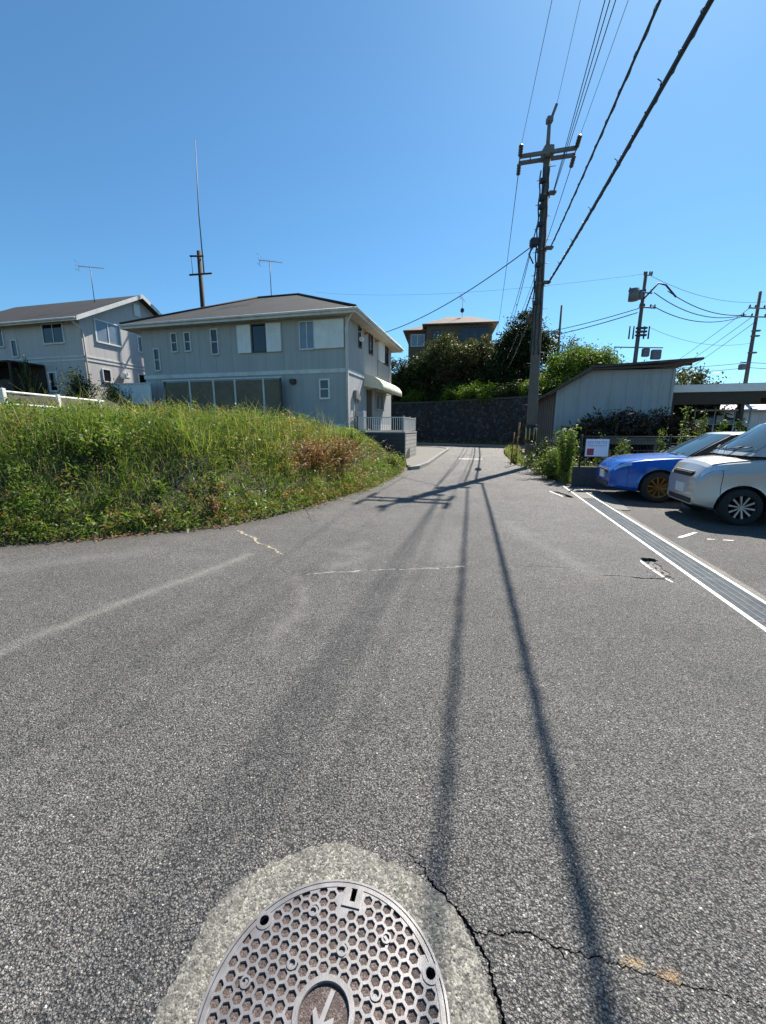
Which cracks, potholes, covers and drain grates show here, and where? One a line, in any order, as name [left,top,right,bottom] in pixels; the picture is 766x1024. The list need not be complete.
pothole [641,558,675,580]
drain grate [694,577,766,621]
drain grate [582,498,608,507]
crack [407,853,766,1024]
drain grate [609,517,648,532]
drain grate [595,507,626,518]
manhole cover [152,842,499,1024]
crack [236,530,285,555]
drain grate [629,531,679,551]
